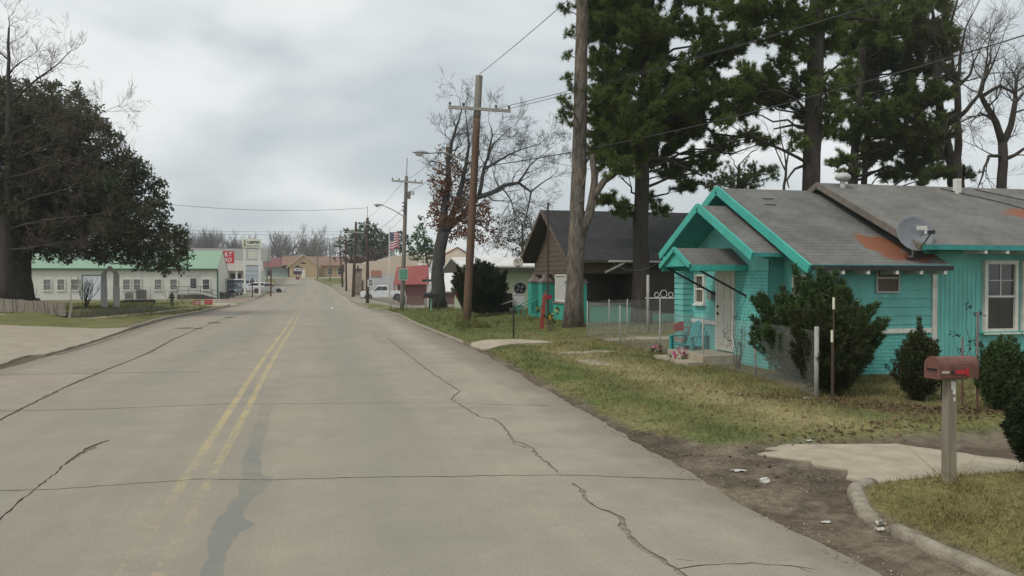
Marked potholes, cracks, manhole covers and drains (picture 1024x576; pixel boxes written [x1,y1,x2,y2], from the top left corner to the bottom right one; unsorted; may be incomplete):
crack [0,313,811,576]
